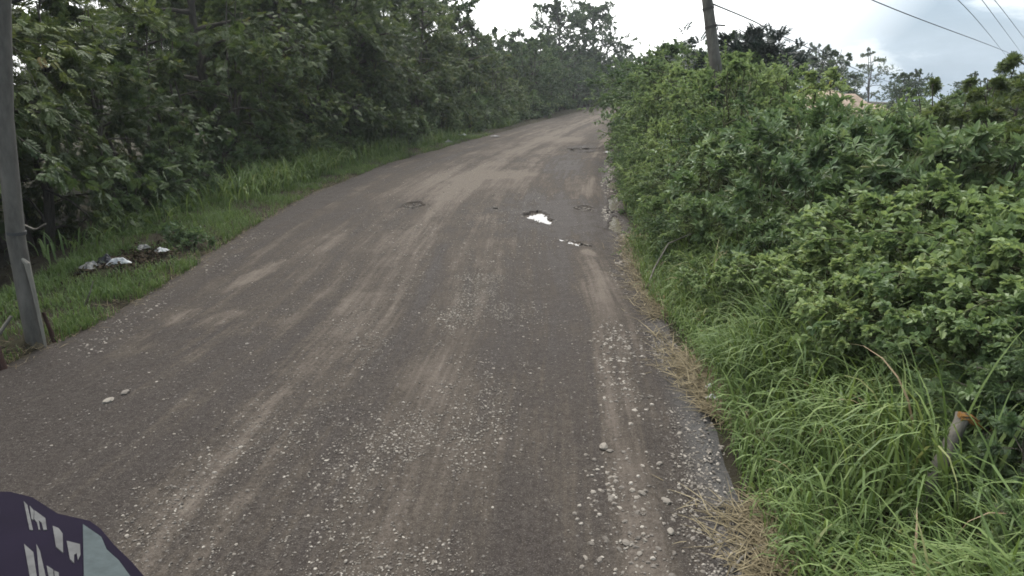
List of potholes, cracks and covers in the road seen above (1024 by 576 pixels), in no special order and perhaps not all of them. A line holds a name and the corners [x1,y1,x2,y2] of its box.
pothole [517,209,560,226]
pothole [394,200,431,210]
pothole [552,238,593,248]
pothole [568,204,602,213]
